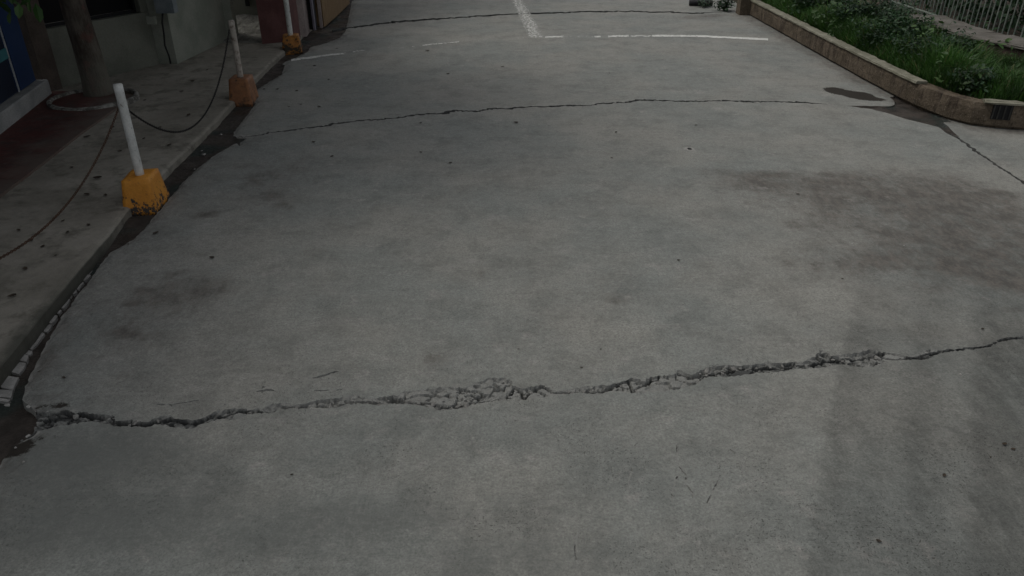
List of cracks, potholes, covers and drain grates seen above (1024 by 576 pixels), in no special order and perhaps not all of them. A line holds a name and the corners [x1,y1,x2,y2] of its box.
crack [237,99,832,137]
crack [20,336,1024,511]
